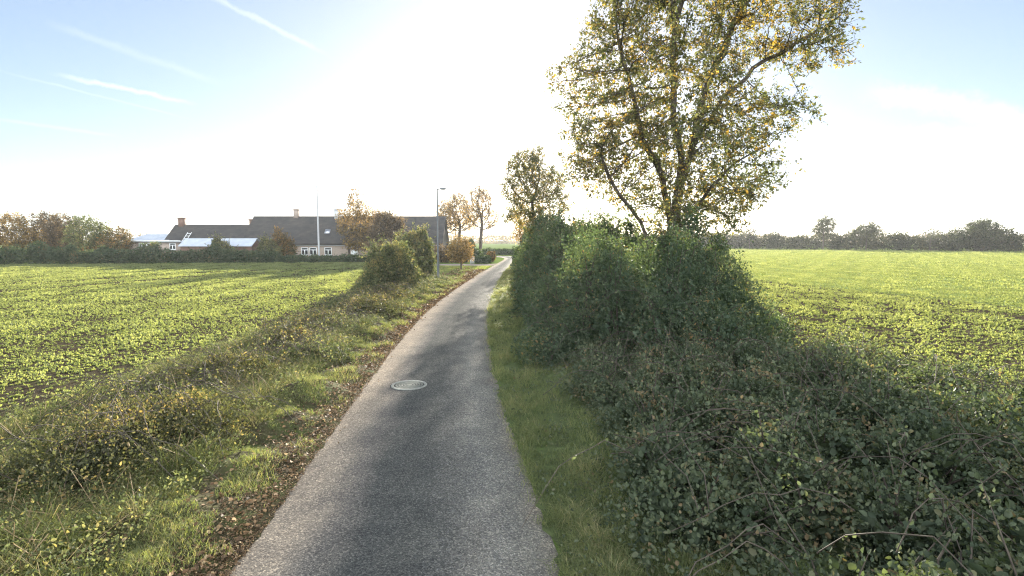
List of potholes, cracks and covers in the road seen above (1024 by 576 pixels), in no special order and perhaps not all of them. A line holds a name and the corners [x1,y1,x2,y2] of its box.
manhole cover [390,380,427,391]
